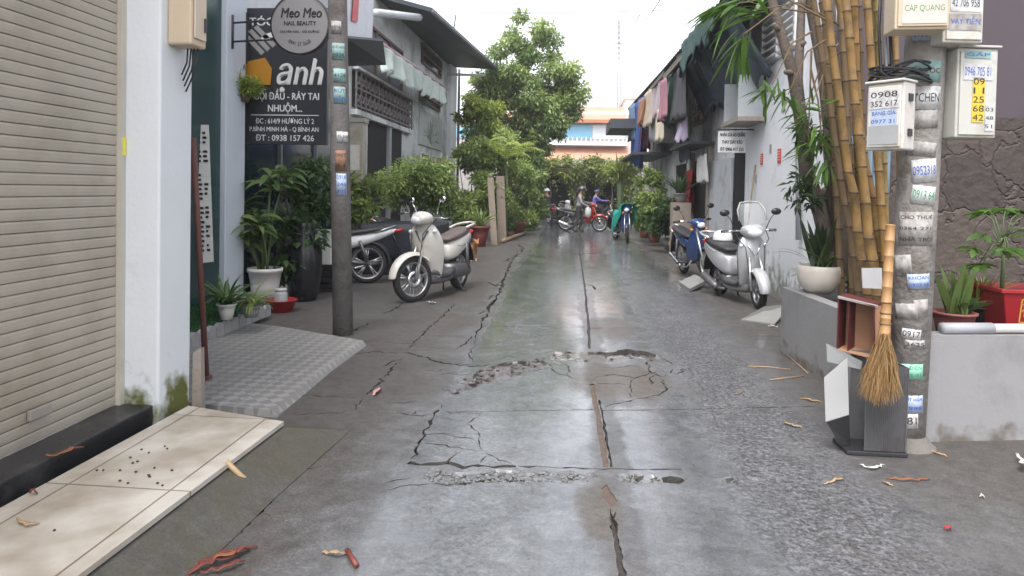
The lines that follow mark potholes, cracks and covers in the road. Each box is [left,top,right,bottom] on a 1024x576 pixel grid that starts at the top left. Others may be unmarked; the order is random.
pothole [453,358,548,395]
pothole [423,468,598,485]
pothole [546,349,662,364]
pothole [616,472,662,484]
crack [280,245,689,490]
pothole [662,476,685,484]
